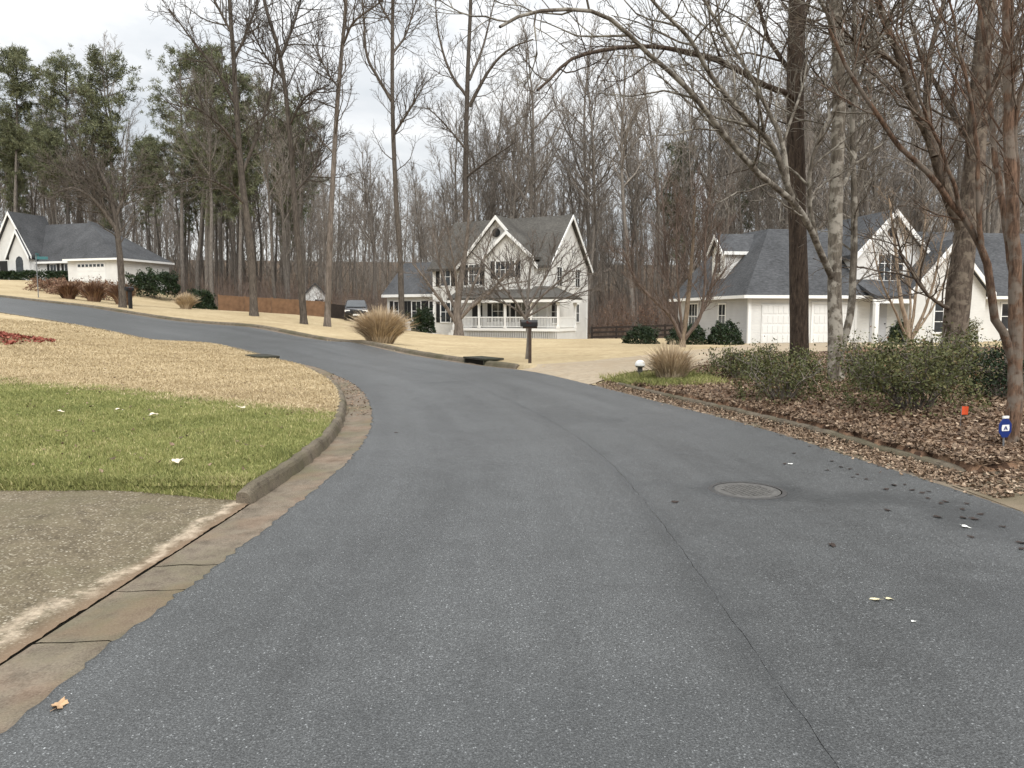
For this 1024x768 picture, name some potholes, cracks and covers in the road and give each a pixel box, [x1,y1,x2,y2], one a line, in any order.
drain grate [463,356,504,365]
manhole cover [708,481,787,500]
